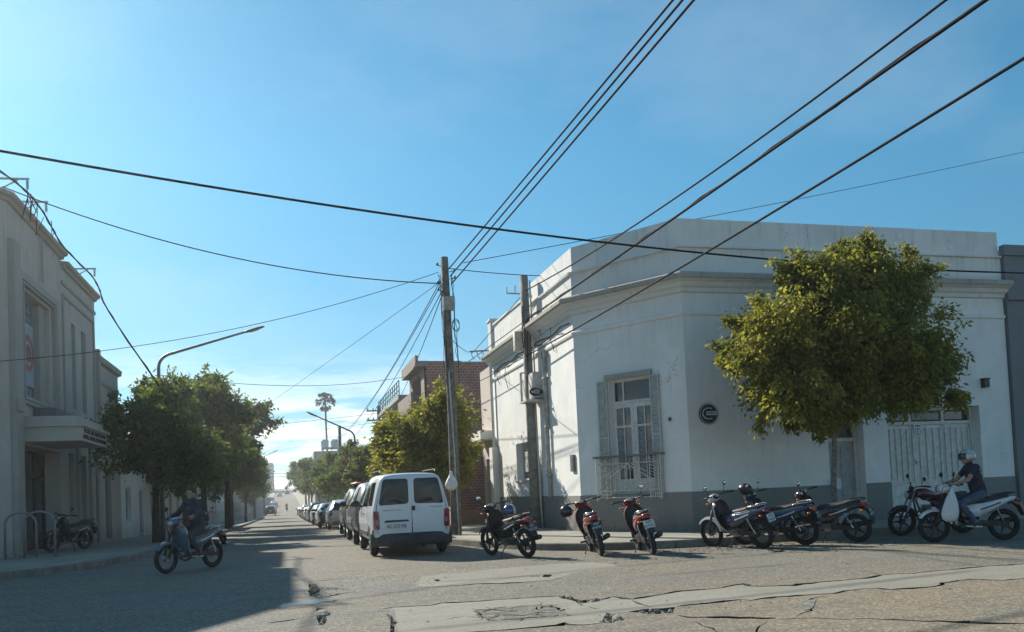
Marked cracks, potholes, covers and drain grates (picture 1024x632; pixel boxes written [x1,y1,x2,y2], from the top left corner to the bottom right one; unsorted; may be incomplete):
crack [616,564,1024,632]
pothole [314,607,331,625]
pothole [308,583,320,598]
